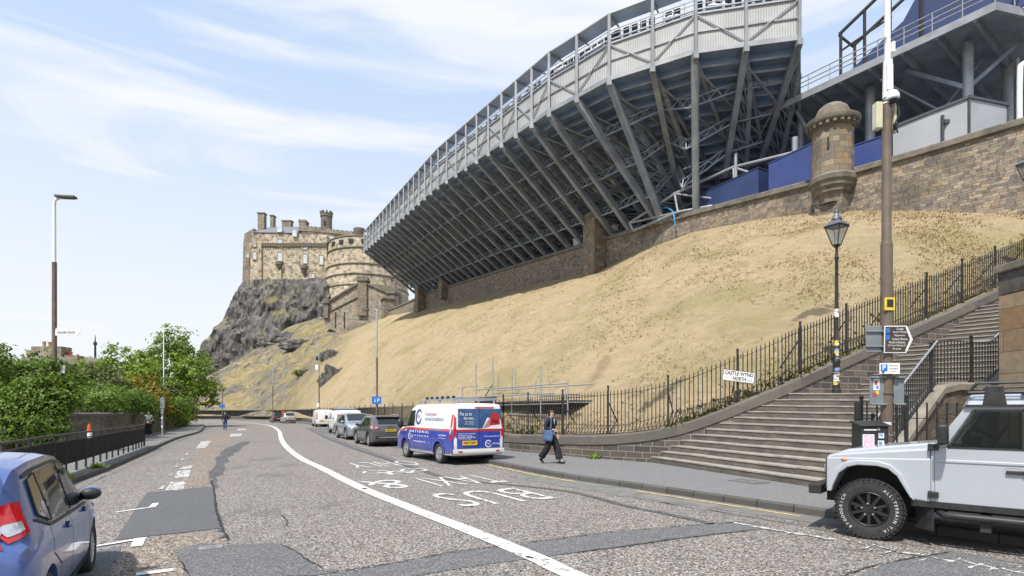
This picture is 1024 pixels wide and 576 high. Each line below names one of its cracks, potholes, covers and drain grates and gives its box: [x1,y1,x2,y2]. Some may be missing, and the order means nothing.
crack [211,480,229,540]
